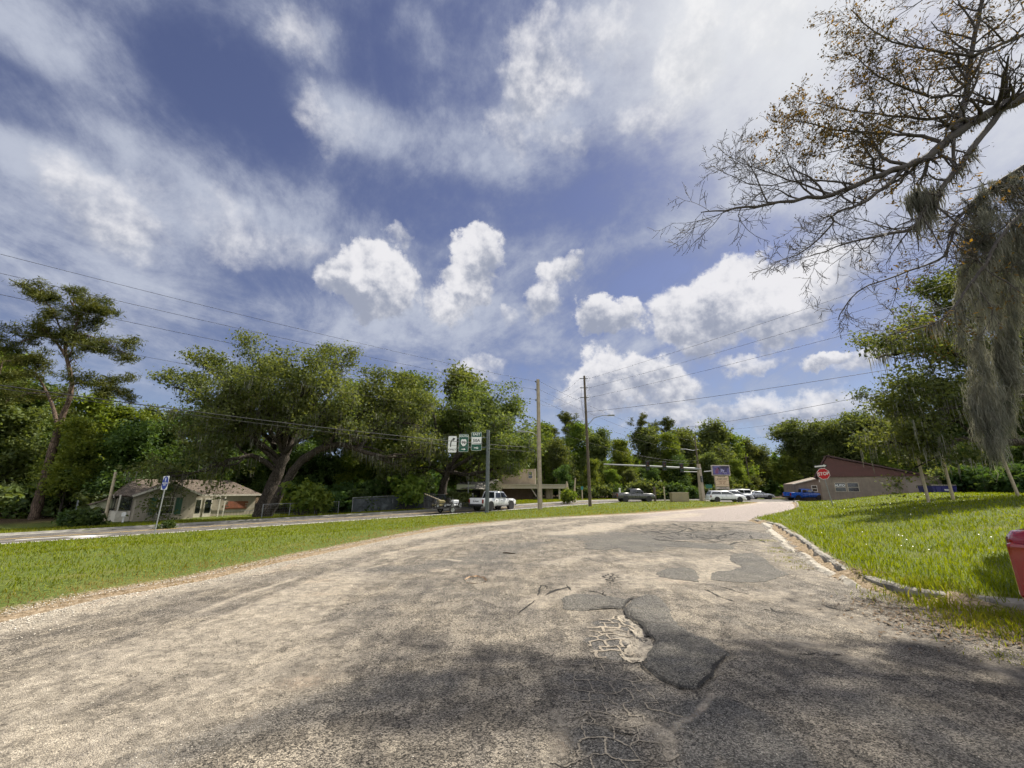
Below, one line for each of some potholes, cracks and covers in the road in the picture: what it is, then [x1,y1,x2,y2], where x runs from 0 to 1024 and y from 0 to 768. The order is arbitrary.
crack [518,583,572,613]
crack [550,574,729,768]
crack [626,523,766,545]
